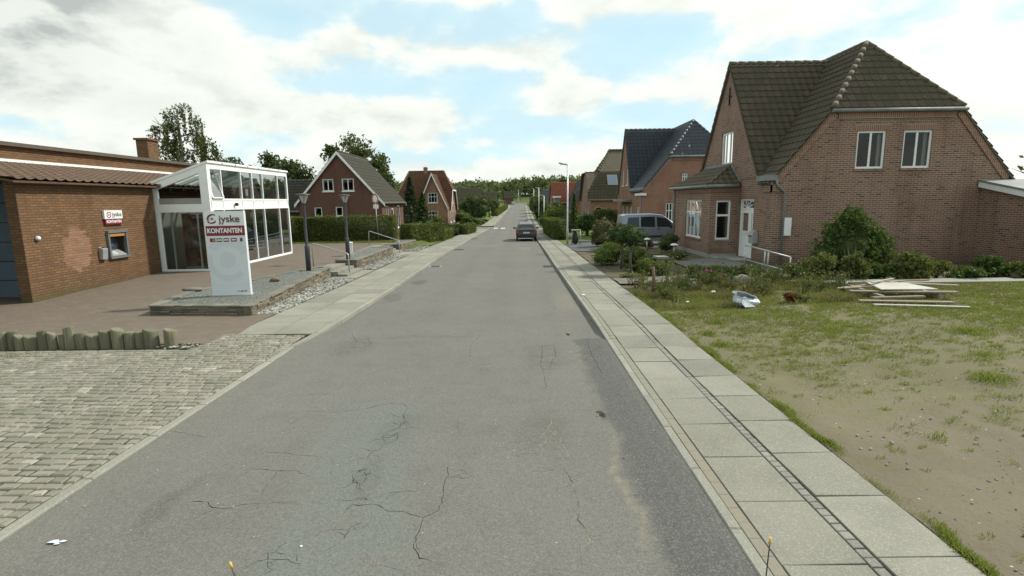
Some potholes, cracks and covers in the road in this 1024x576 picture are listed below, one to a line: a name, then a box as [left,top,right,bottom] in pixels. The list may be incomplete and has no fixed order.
crack [309,394,474,571]
crack [192,451,304,514]
crack [515,410,601,567]
